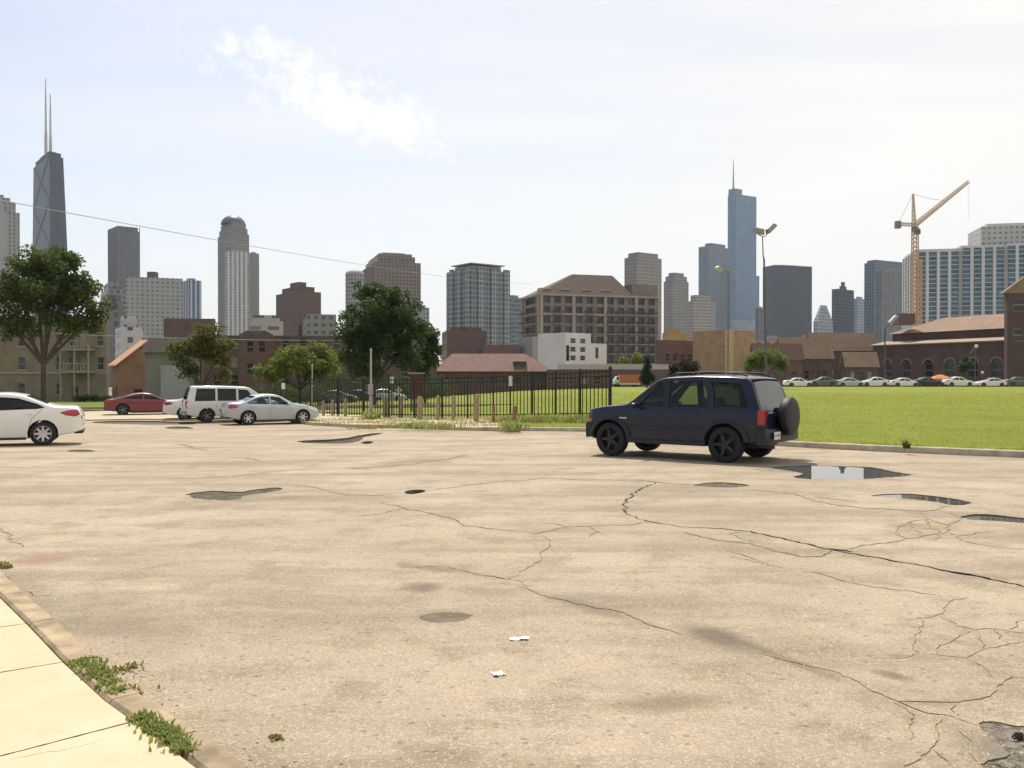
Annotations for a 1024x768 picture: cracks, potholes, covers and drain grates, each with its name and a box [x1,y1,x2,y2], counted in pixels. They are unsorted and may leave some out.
pothole [186,488,282,500]
pothole [419,613,473,623]
crack [187,455,1024,768]
crack [0,529,24,547]
pothole [977,721,1024,768]
pothole [297,433,381,444]
